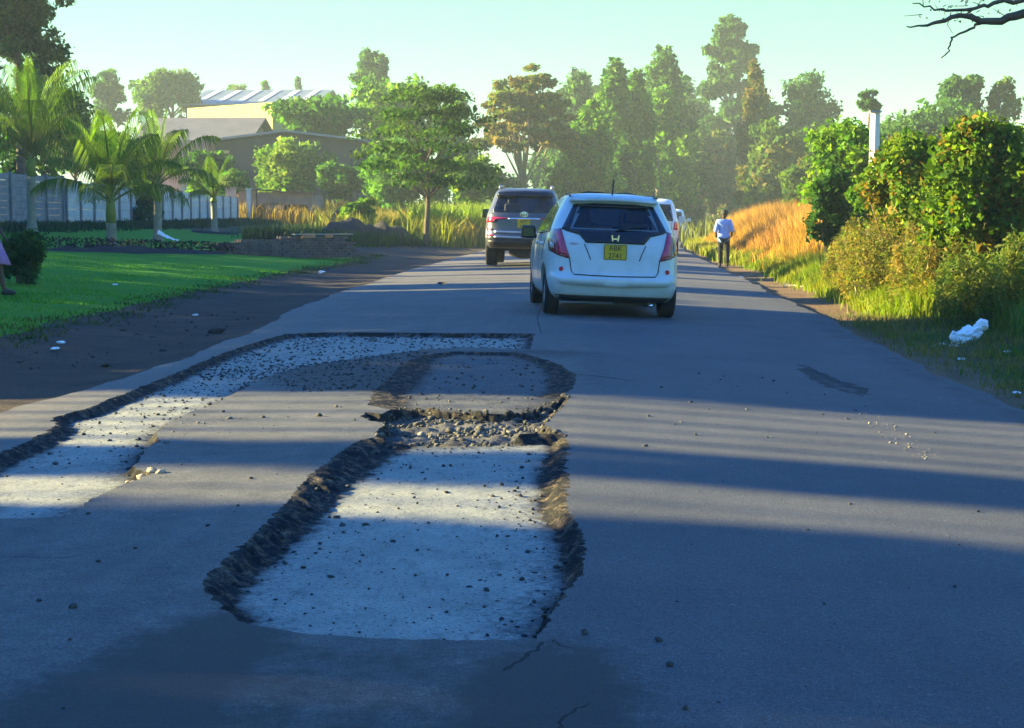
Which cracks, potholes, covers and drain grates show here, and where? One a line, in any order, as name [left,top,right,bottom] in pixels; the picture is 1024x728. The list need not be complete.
pothole [0,332,535,519]
pothole [360,396,568,447]
crack [502,639,571,671]
pothole [202,434,587,641]
crack [557,703,590,728]
pothole [367,351,577,414]
